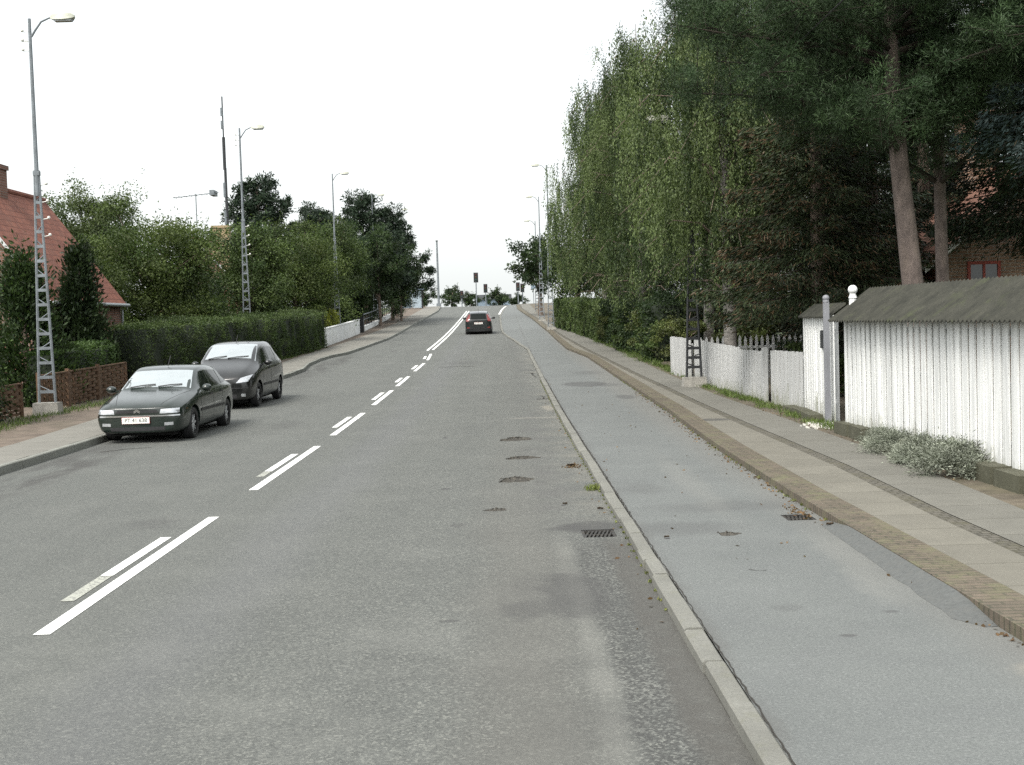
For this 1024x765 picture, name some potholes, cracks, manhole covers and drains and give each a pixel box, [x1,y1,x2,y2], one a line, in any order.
drain grate [581,530,617,538]
